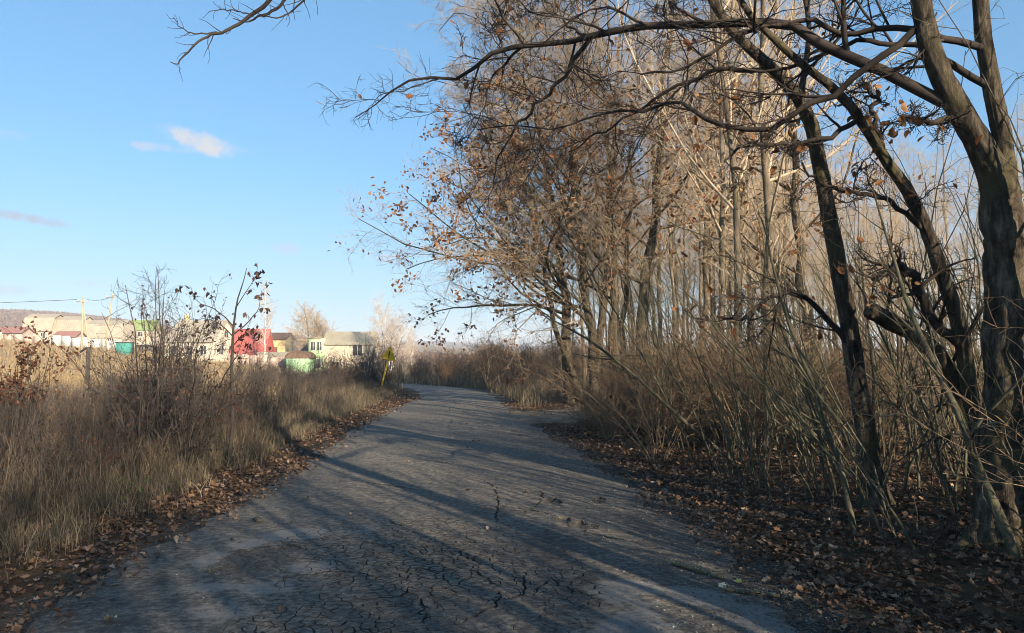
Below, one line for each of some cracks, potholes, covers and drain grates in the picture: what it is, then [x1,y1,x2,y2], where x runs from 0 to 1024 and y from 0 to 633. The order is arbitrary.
pothole [555,516,600,534]
crack [480,471,576,523]
